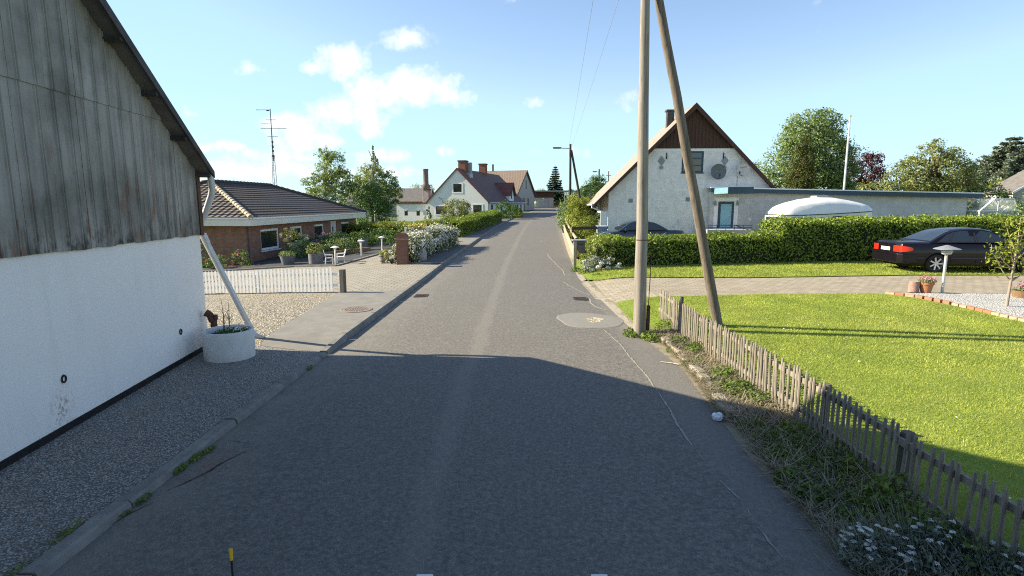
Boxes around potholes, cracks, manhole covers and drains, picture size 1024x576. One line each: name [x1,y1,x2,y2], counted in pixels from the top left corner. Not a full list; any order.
crack [113,440,253,524]
crack [720,481,783,557]
crack [603,329,704,460]
crack [540,241,612,311]
